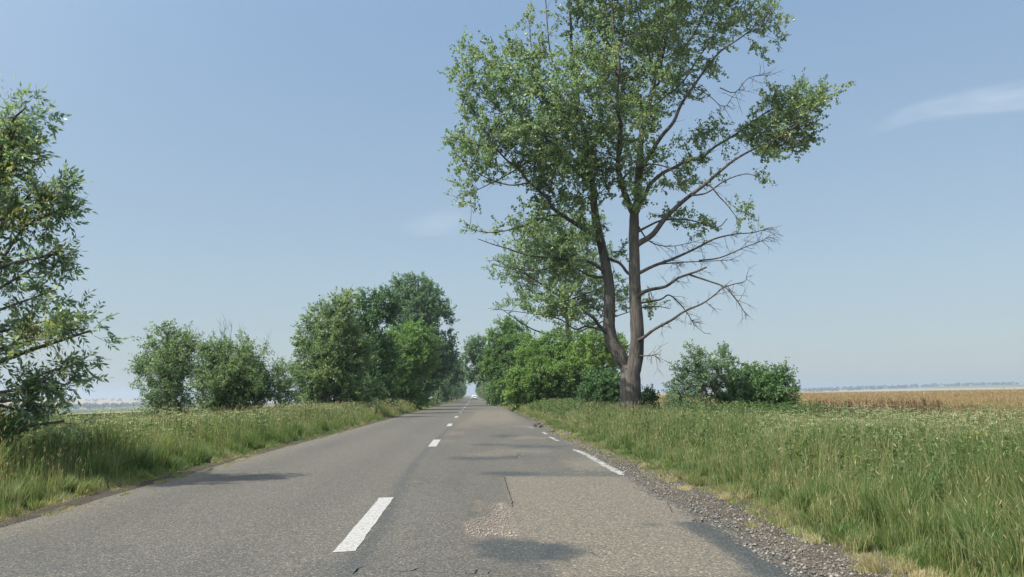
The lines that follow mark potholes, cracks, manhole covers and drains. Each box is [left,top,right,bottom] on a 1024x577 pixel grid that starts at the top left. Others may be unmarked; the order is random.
pothole [461,501,522,538]
